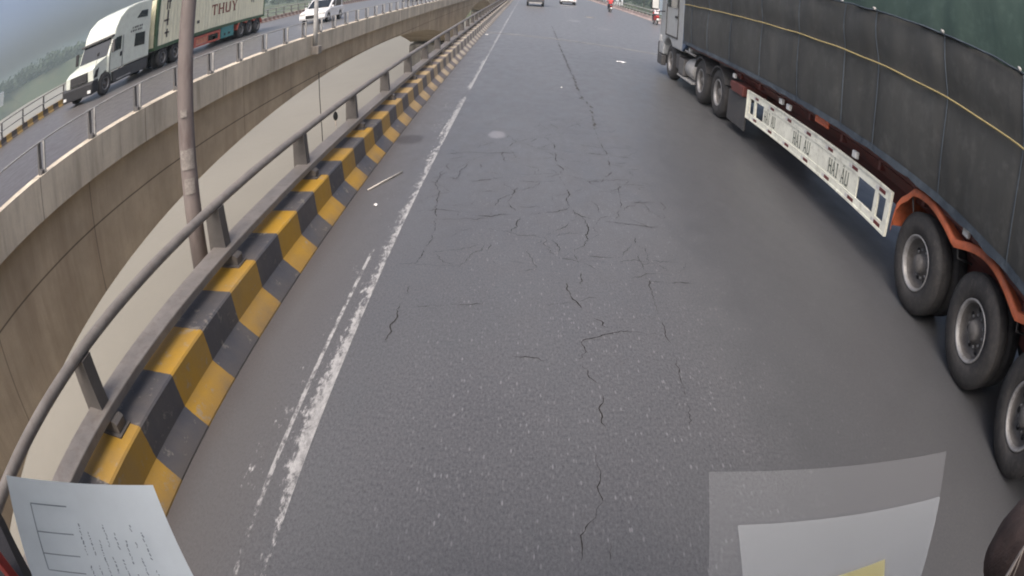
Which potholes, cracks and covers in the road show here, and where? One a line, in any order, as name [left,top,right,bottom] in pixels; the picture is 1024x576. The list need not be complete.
crack [552,27,597,130]
crack [385,118,692,560]
